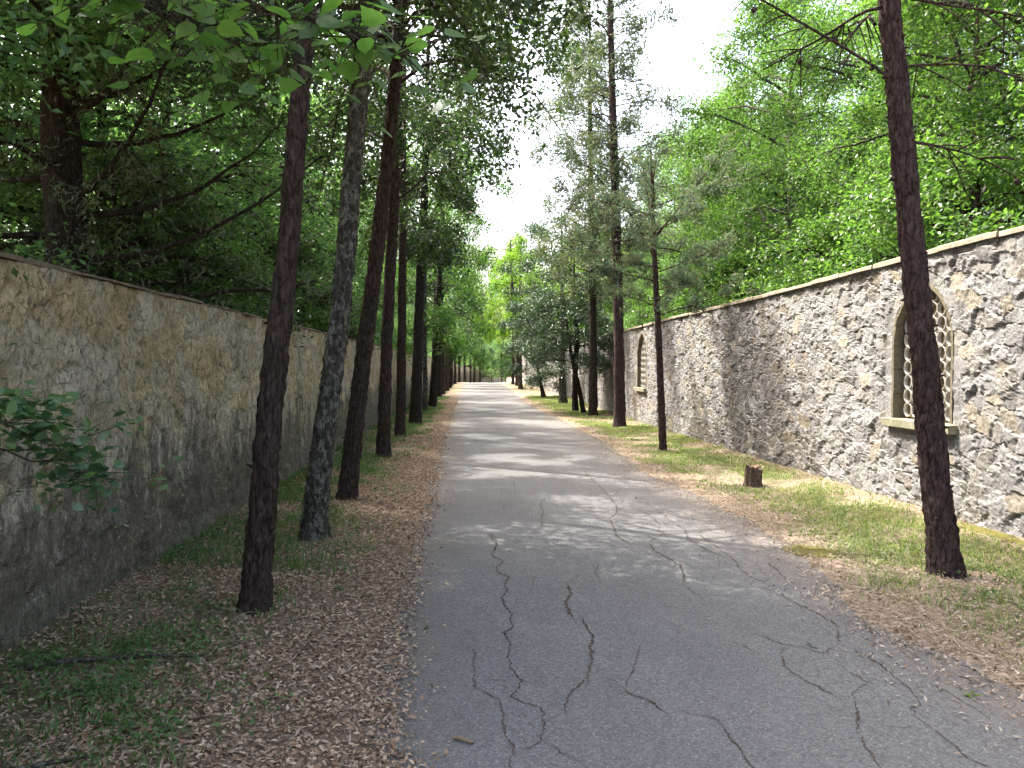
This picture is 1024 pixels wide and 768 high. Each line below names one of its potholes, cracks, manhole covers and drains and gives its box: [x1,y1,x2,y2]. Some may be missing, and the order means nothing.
crack [645,501,991,768]
crack [586,473,630,545]
crack [460,534,761,768]
